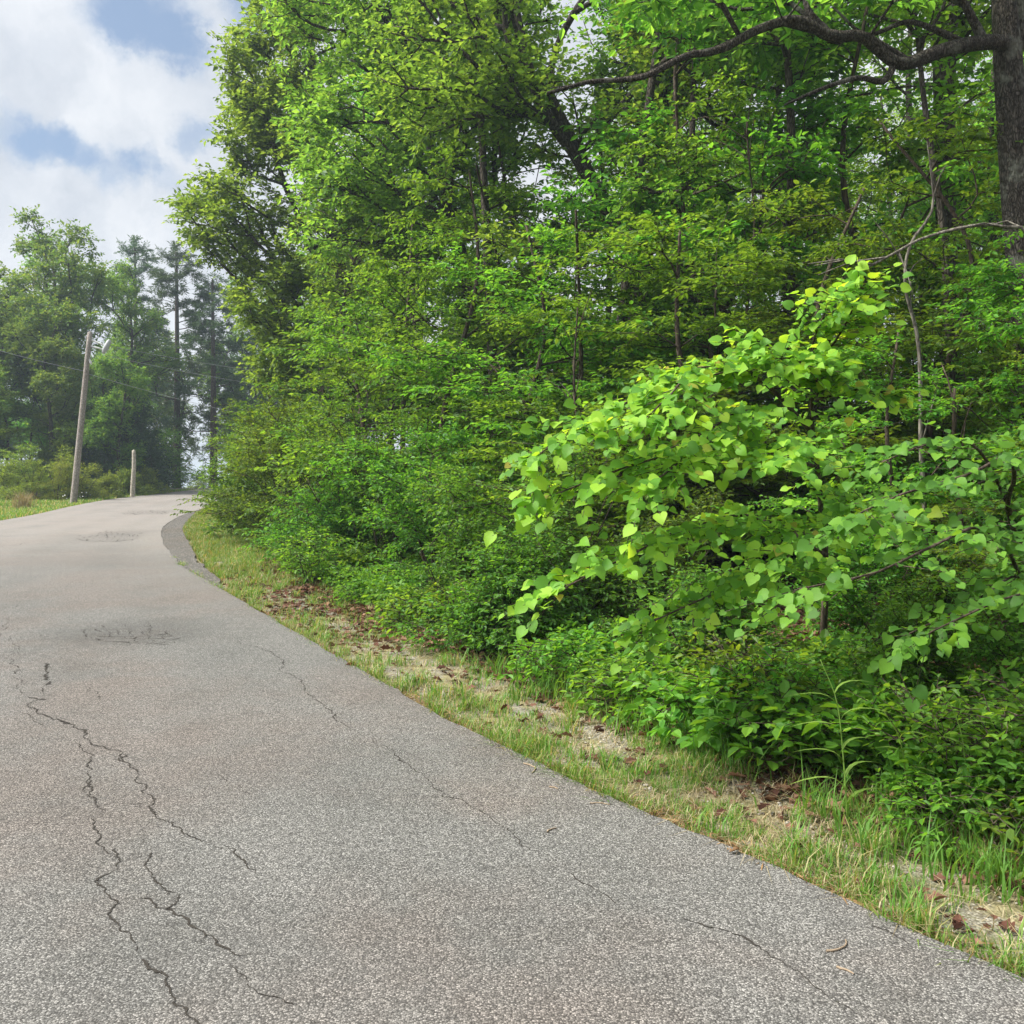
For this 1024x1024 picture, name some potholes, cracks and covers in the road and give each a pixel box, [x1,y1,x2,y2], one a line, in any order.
crack [682,917,862,1018]
crack [241,639,540,852]
crack [1,605,316,1024]
